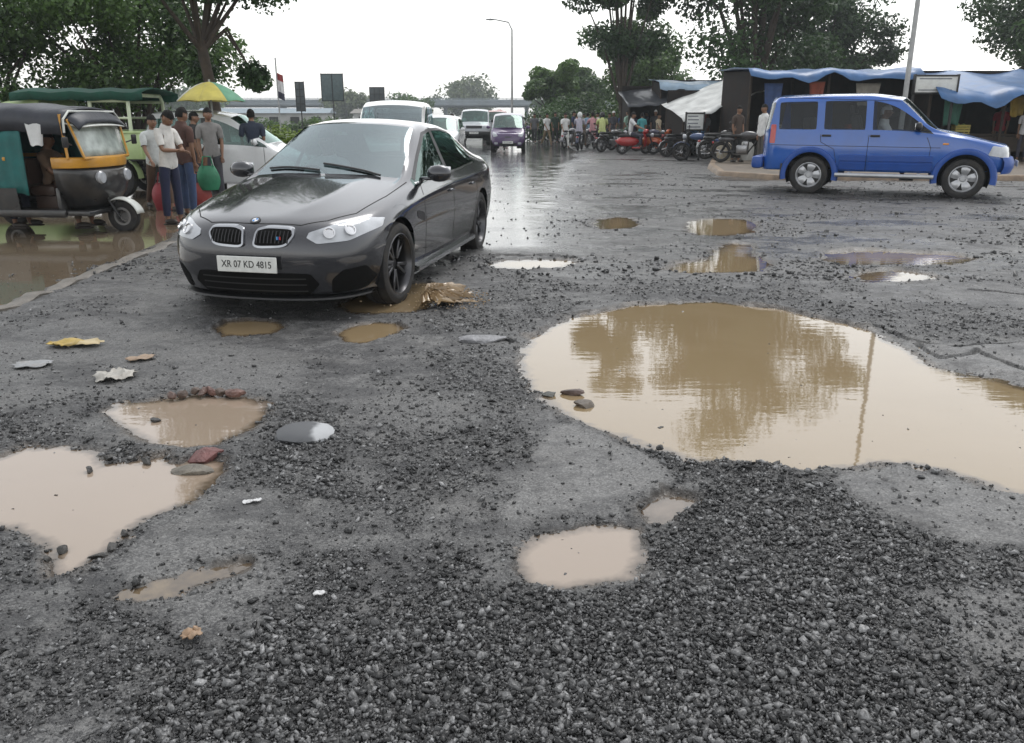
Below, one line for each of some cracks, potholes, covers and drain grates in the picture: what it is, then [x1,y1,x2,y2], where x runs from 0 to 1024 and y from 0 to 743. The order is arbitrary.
pothole [677,217,770,237]
pothole [328,279,447,315]
pothole [650,240,785,276]
pothole [476,256,588,270]
pothole [89,389,284,453]
pothole [585,215,650,230]
pothole [805,246,992,267]
pothole [206,317,293,337]
pothole [834,266,951,284]
pothole [623,481,718,534]
pothole [328,320,413,345]
pothole [102,553,267,605]
